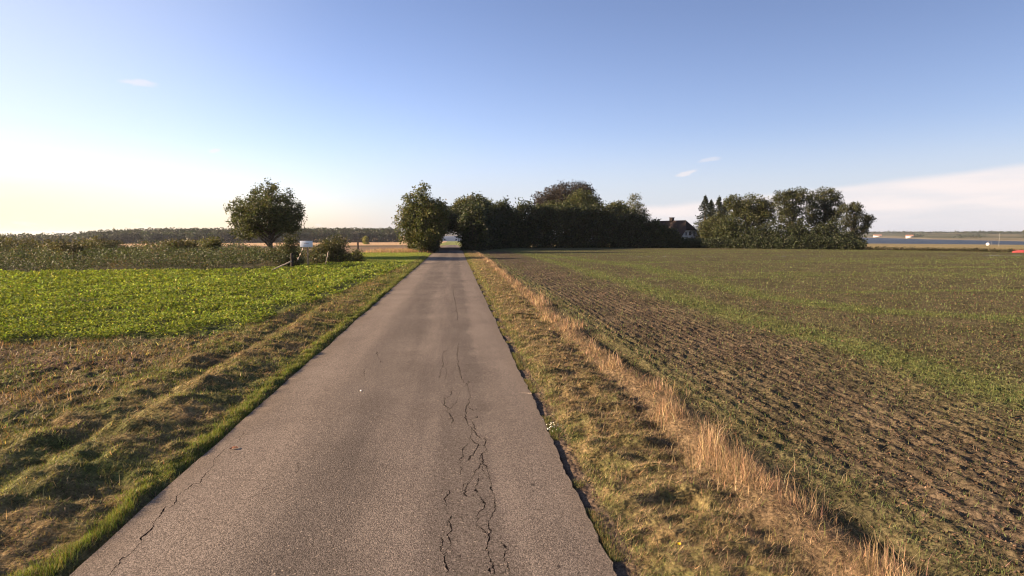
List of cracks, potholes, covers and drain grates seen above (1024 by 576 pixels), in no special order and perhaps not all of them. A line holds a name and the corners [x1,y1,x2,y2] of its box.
crack [108,431,244,576]
crack [439,347,511,574]
